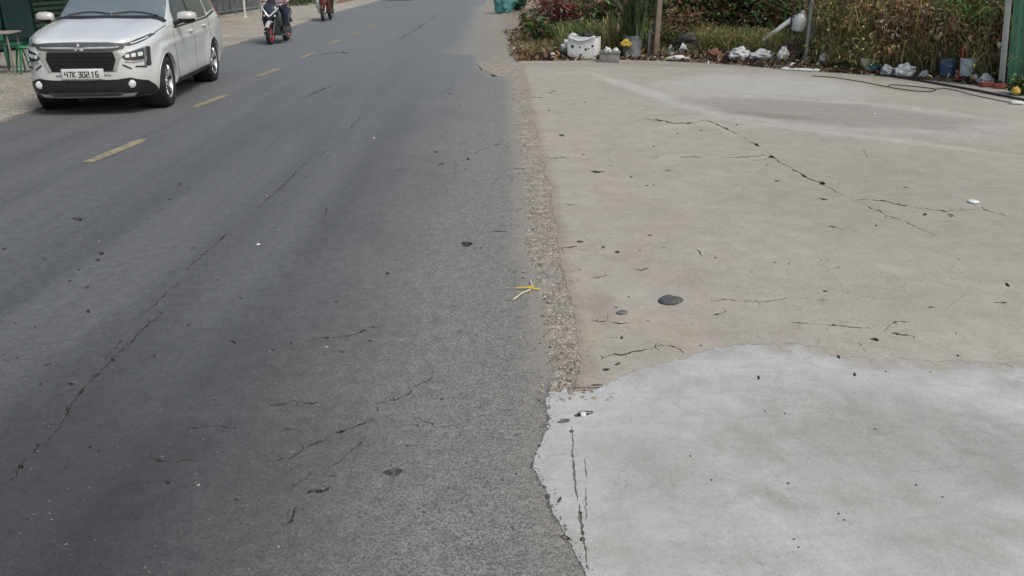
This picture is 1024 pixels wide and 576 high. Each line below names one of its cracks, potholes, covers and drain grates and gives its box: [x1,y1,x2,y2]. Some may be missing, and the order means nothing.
crack [648,119,738,134]
crack [793,322,867,352]
pothole [382,468,403,477]
crack [10,232,233,482]
crack [265,372,459,524]
crack [596,316,682,359]
crack [884,307,933,339]
crack [852,199,1006,235]
crack [306,325,382,342]
